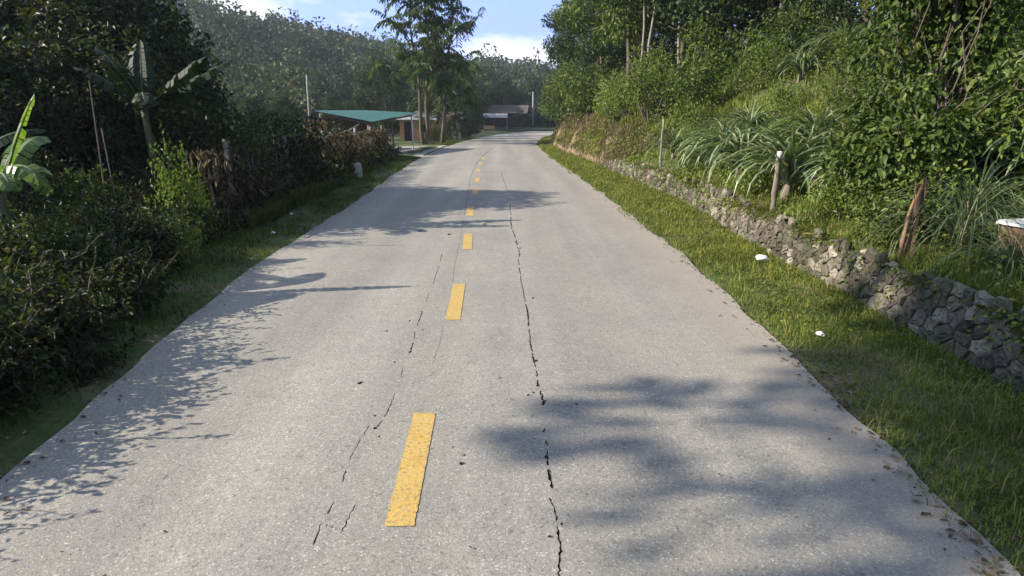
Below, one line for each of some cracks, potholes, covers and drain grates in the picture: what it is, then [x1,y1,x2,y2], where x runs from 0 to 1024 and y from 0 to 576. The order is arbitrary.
crack [509,204,563,576]
crack [313,256,442,545]
